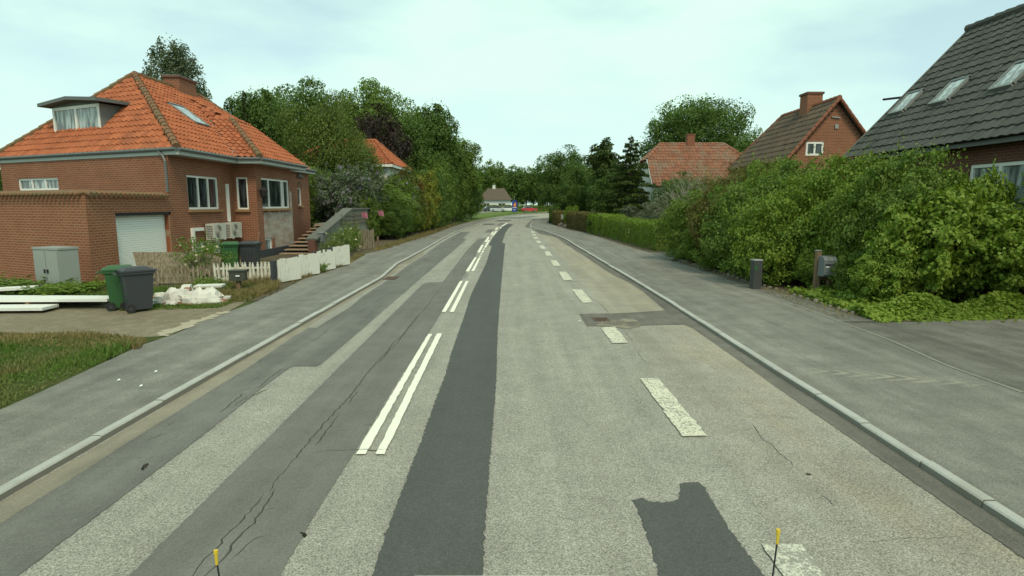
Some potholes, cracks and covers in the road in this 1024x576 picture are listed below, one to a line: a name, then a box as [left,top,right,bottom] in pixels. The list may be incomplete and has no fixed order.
crack [193,287,442,576]
